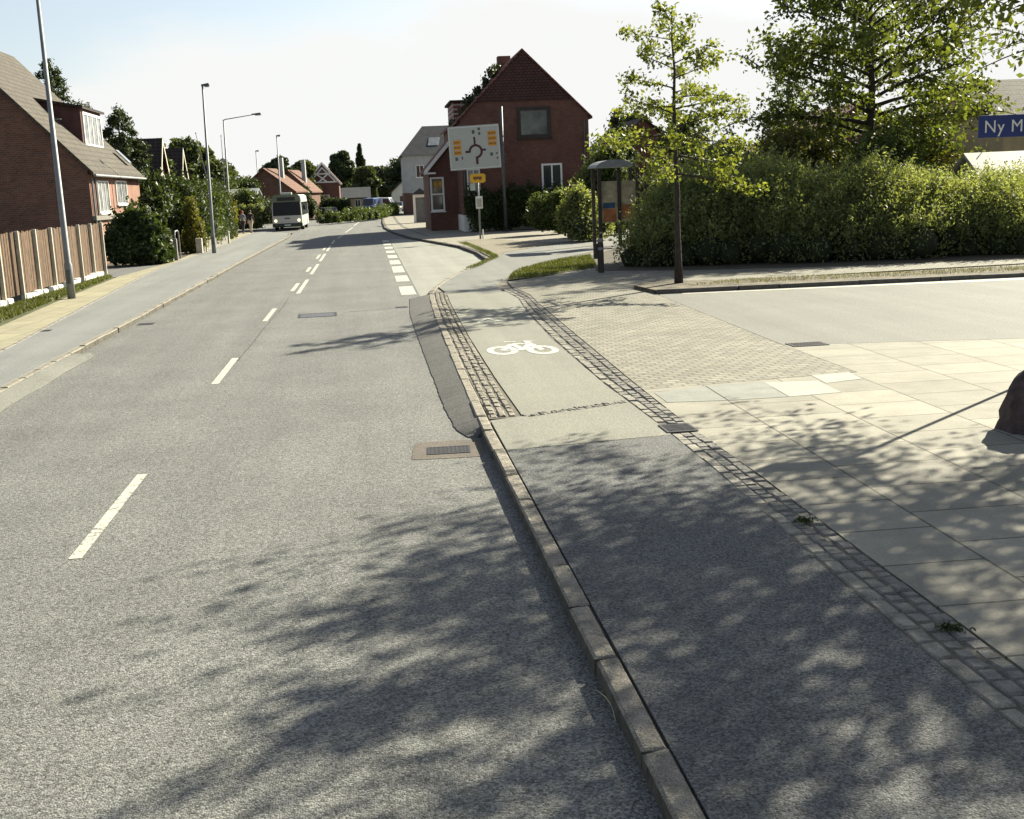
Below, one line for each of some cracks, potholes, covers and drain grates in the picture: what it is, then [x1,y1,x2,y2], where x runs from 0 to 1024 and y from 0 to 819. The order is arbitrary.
drain grate [427,445,471,455]
